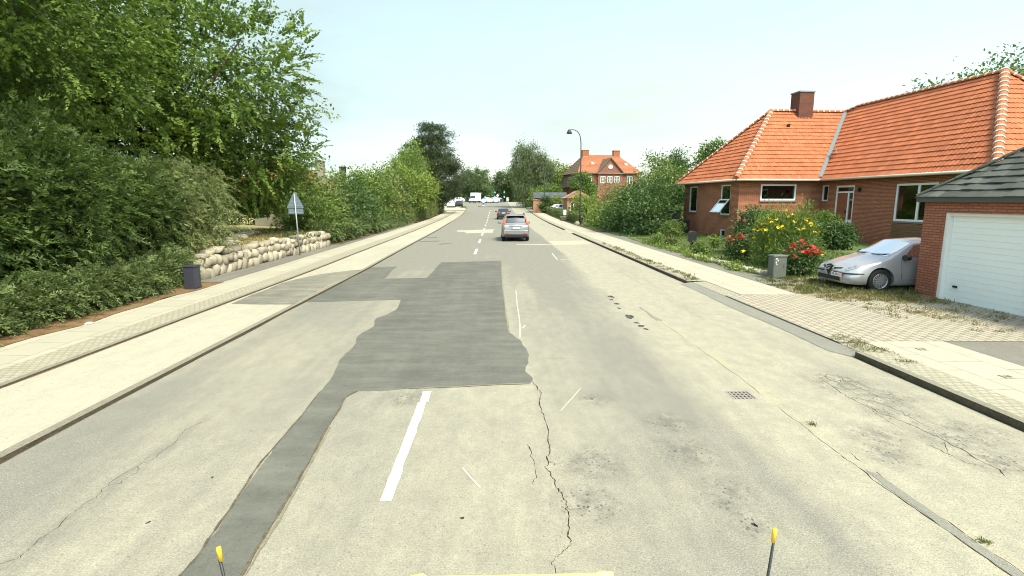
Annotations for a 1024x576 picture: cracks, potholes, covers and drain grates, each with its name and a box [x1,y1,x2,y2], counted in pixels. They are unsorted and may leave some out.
drain grate [724,391,759,400]
crack [783,411,1024,576]
crack [528,382,584,573]
crack [819,374,1005,476]
crack [1,419,209,564]
